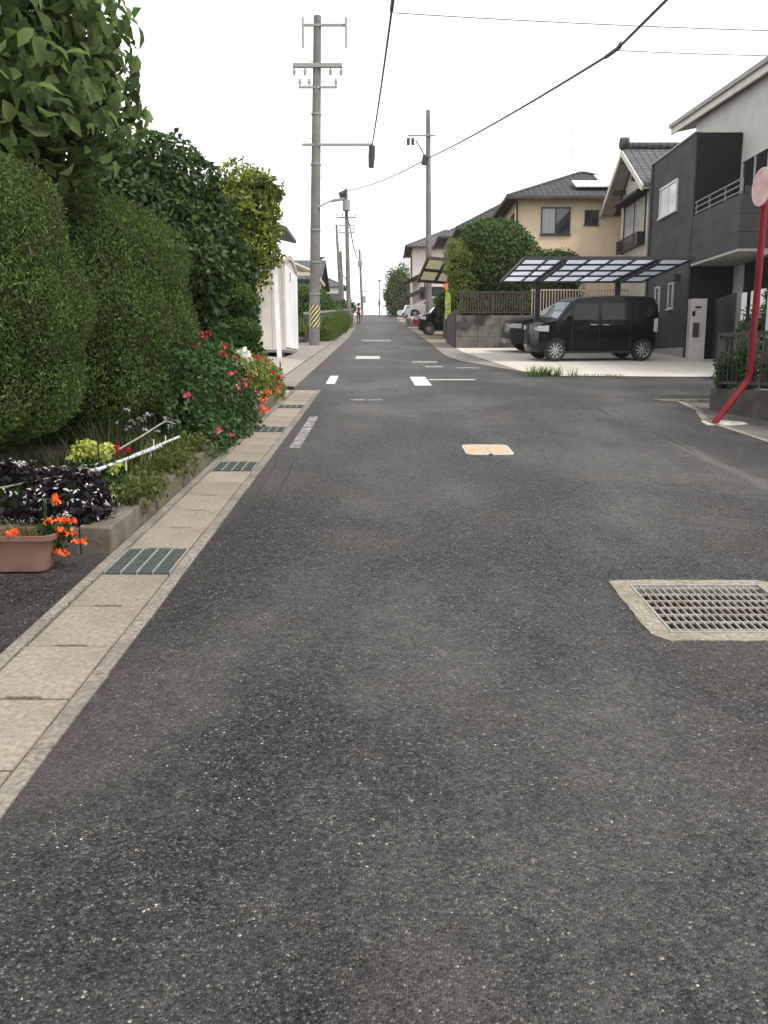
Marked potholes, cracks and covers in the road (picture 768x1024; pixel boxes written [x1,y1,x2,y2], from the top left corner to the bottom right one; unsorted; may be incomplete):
drain grate [608,580,768,642]
manhole cover [462,445,514,455]
drain grate [211,461,259,473]
crack [222,450,298,580]
drain grate [103,548,190,577]
